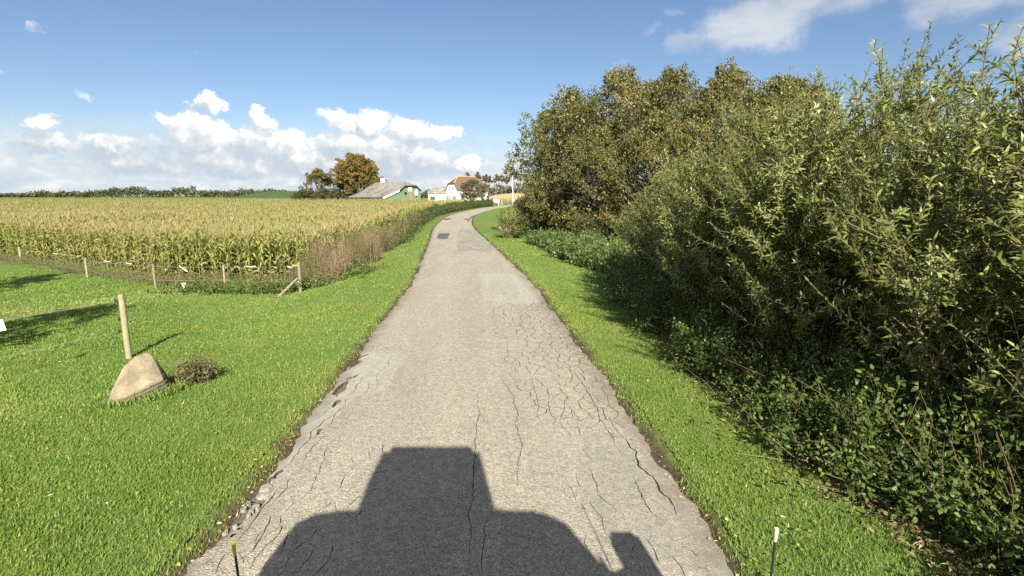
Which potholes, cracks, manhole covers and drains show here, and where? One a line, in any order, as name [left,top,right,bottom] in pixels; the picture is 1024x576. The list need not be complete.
crack [467,391,494,572]
crack [488,292,698,576]
pothole [332,381,349,397]
crack [207,342,394,576]
